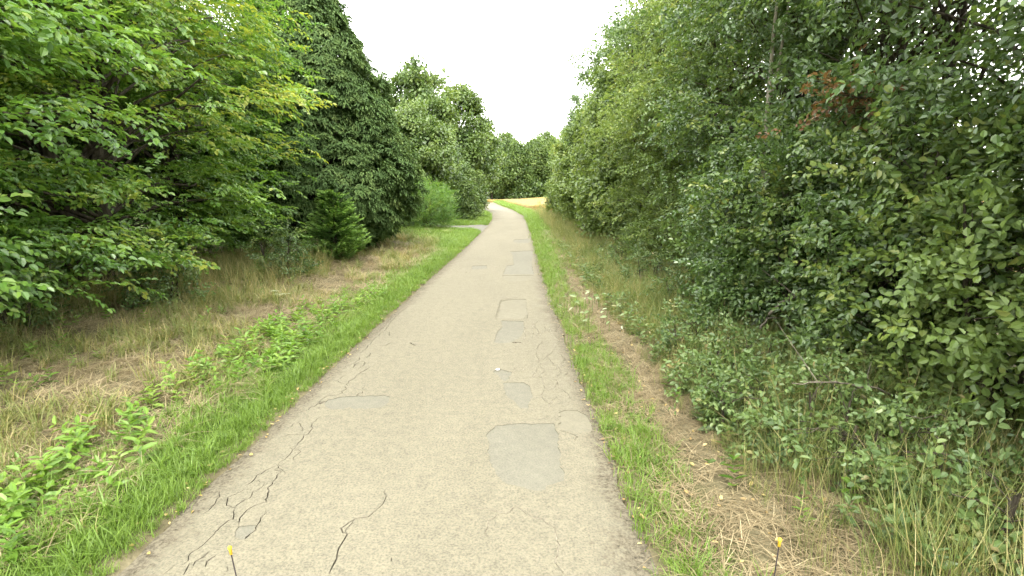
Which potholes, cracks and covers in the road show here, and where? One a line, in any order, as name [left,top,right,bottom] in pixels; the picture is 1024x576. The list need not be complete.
crack [163,310,403,575]
crack [496,298,571,408]
